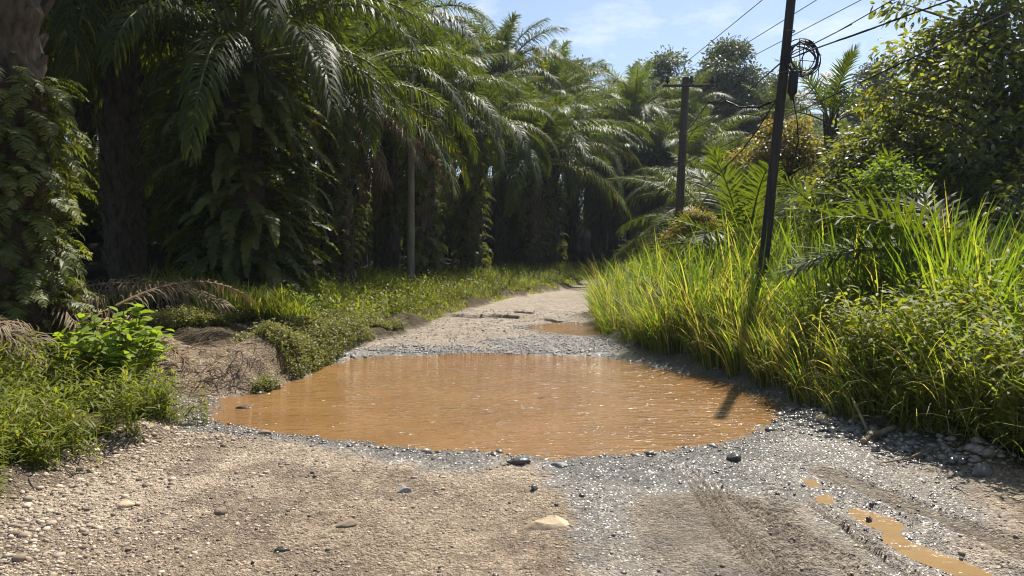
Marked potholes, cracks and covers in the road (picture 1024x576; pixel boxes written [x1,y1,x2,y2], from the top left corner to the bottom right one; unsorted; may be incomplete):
pothole [197,344,797,461]
pothole [523,322,604,336]
